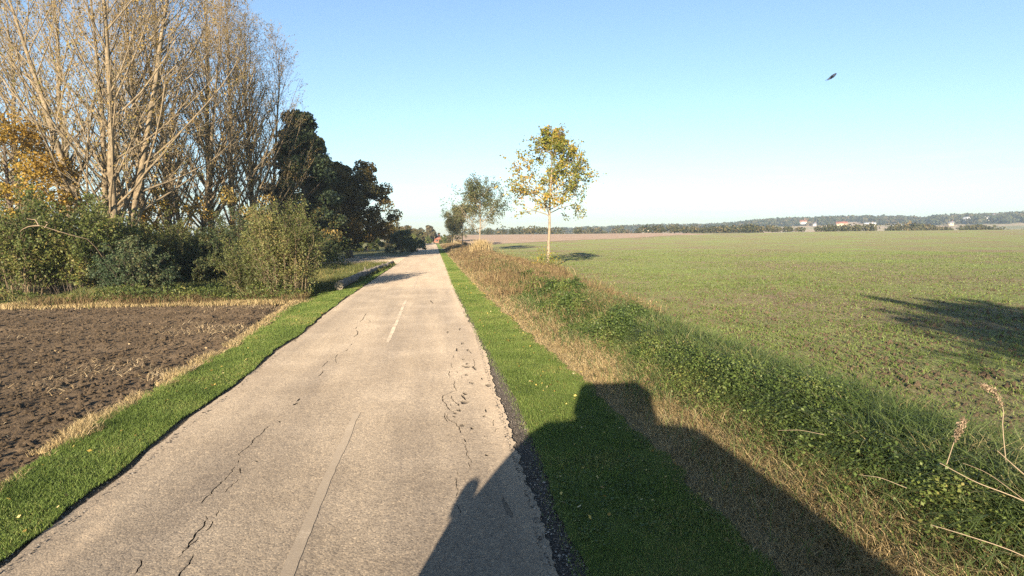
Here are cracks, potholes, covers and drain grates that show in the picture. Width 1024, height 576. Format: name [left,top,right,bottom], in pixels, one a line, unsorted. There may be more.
crack [442,355,499,513]
crack [173,426,269,576]
